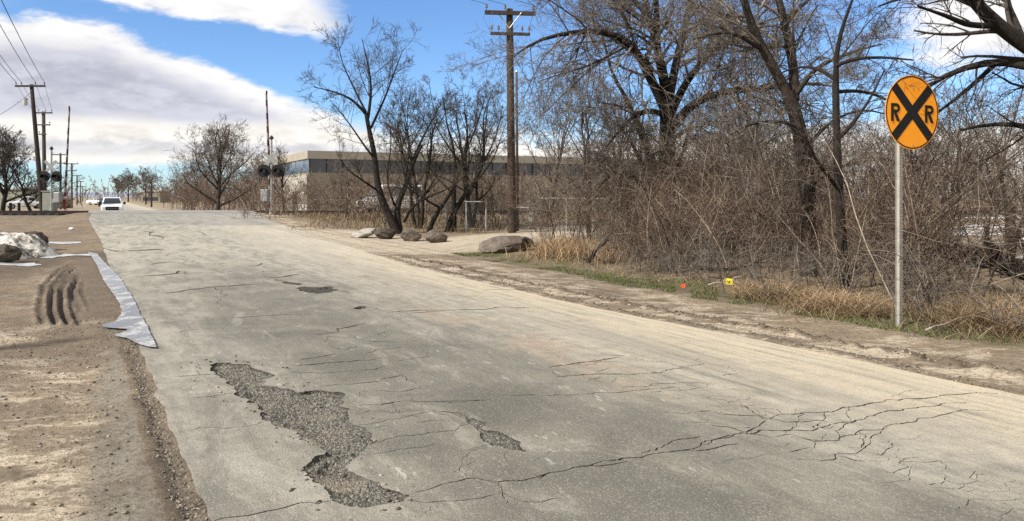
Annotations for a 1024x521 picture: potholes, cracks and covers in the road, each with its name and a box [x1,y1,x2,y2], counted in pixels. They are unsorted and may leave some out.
crack [103,231,1017,517]
pothole [466,418,526,452]
pothole [210,362,409,508]
pothole [297,286,339,294]
